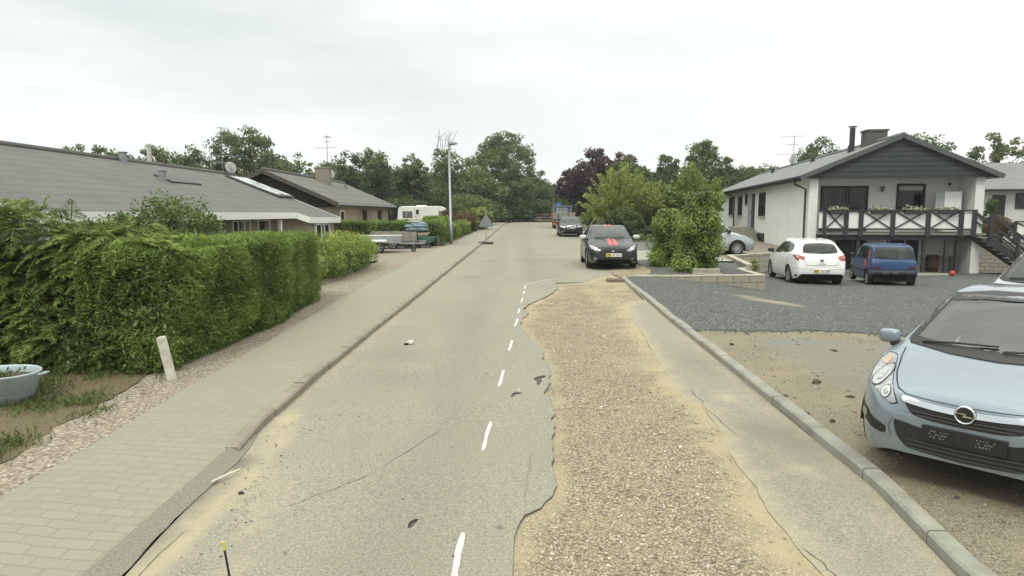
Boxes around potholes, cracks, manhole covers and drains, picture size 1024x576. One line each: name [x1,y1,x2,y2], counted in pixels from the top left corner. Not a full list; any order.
pothole [512,275,823,576]
